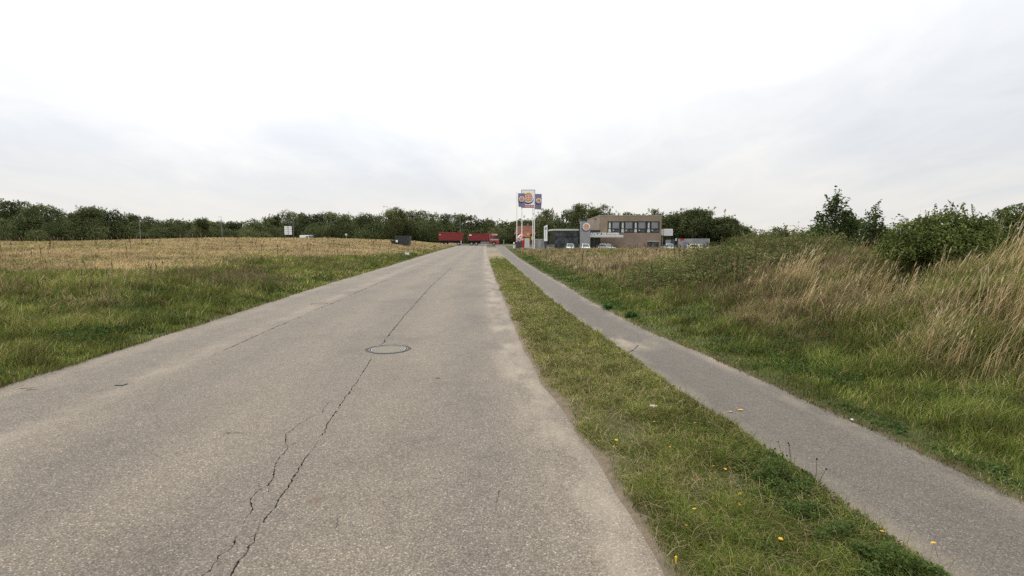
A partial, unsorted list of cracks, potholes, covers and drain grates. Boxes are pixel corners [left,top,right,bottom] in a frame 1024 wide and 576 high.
manhole cover [365,345,411,354]
crack [202,269,450,576]
